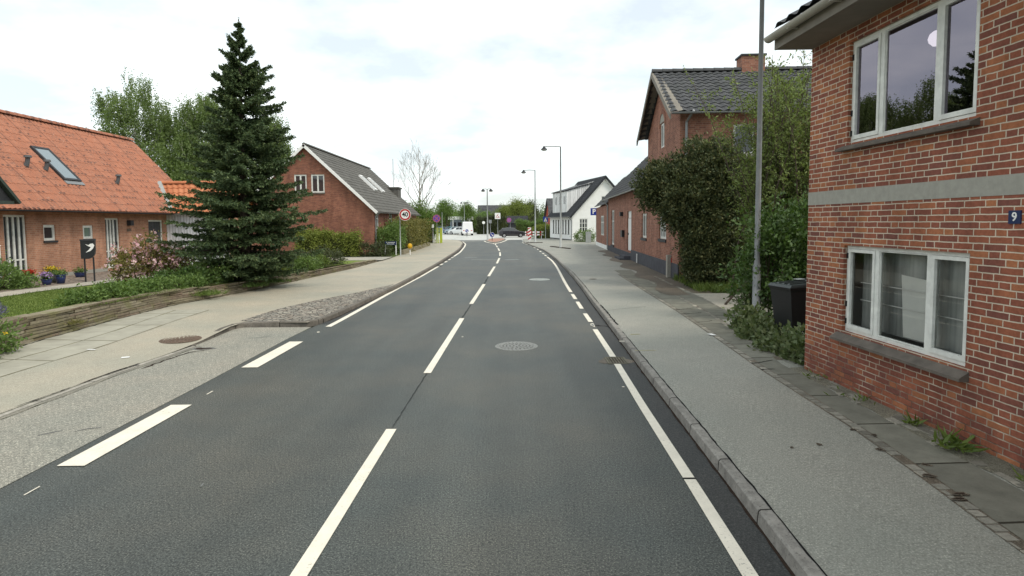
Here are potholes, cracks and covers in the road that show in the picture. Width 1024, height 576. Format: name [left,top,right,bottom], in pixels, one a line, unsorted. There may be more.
manhole cover [159,335,202,344]
manhole cover [495,341,538,351]
